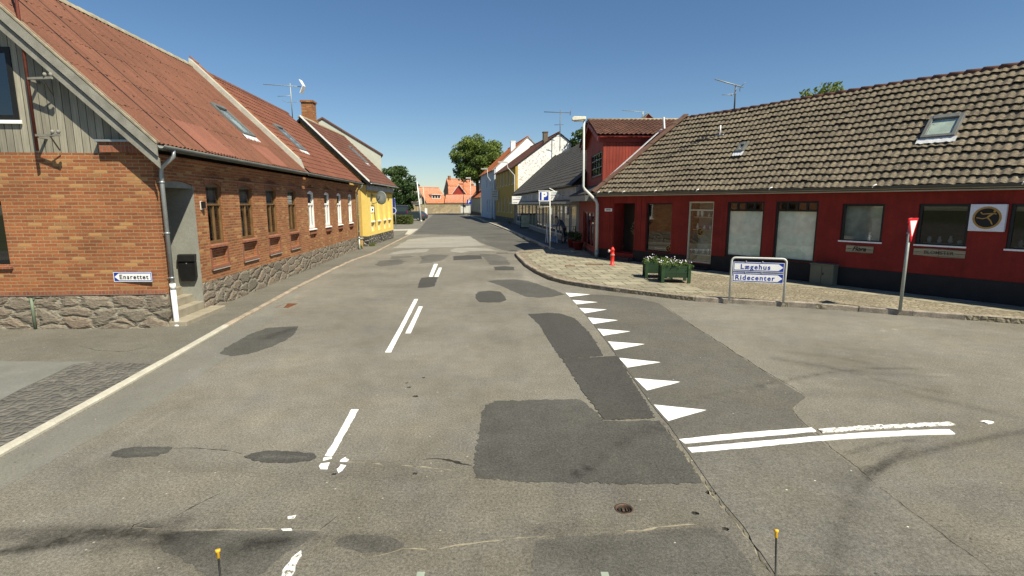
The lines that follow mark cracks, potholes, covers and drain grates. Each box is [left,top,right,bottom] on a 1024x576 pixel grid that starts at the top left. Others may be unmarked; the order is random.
manhole cover [615,503,634,514]
crack [126,493,337,532]
crack [328,458,472,471]
